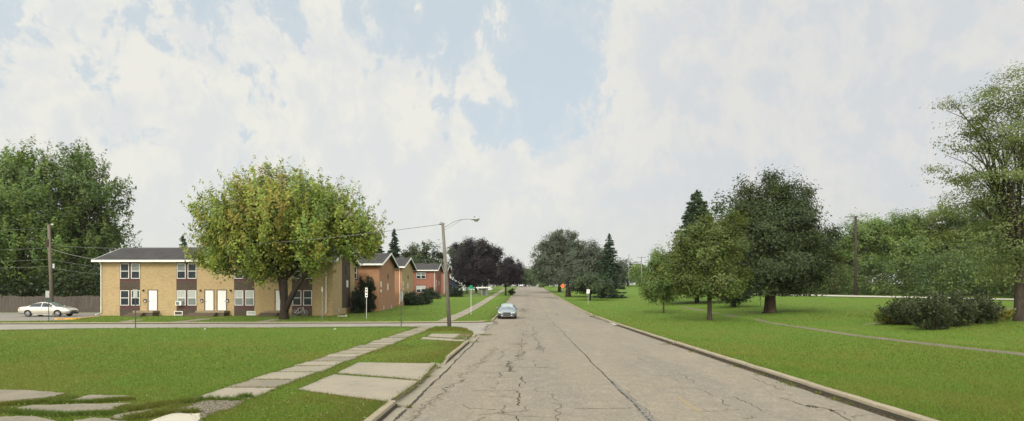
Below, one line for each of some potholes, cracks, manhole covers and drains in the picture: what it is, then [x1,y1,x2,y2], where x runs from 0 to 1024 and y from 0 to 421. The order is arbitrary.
crack [408,308,562,421]
crack [643,360,761,421]
